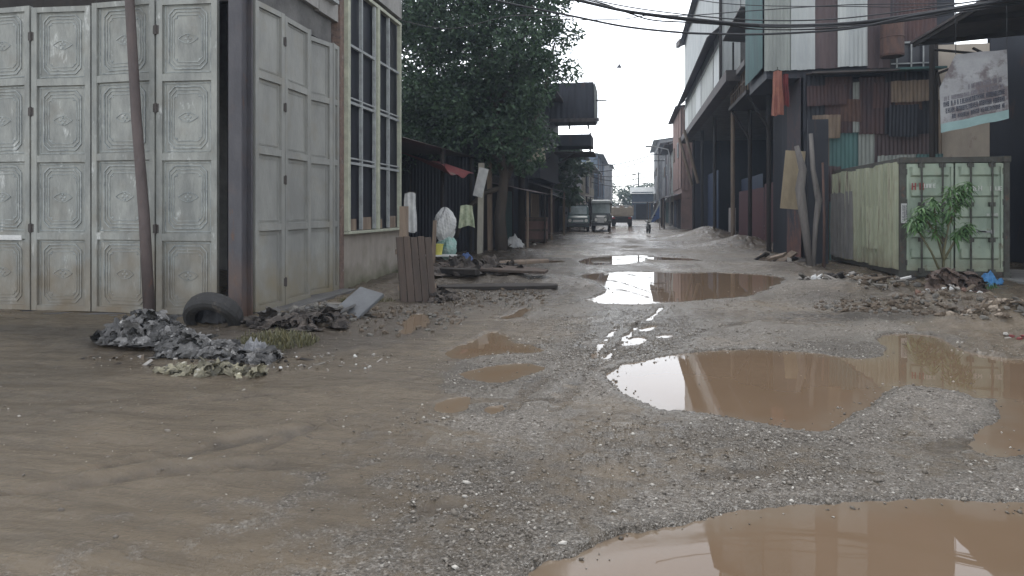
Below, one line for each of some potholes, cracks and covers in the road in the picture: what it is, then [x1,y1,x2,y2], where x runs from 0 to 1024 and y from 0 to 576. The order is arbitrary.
pothole [590,330,1024,465]
pothole [568,254,656,266]
pothole [477,483,1024,576]
pothole [431,328,555,362]
pothole [419,392,485,417]
pothole [444,360,558,387]
pothole [488,305,542,321]
pothole [386,310,442,336]
pothole [568,270,798,306]
